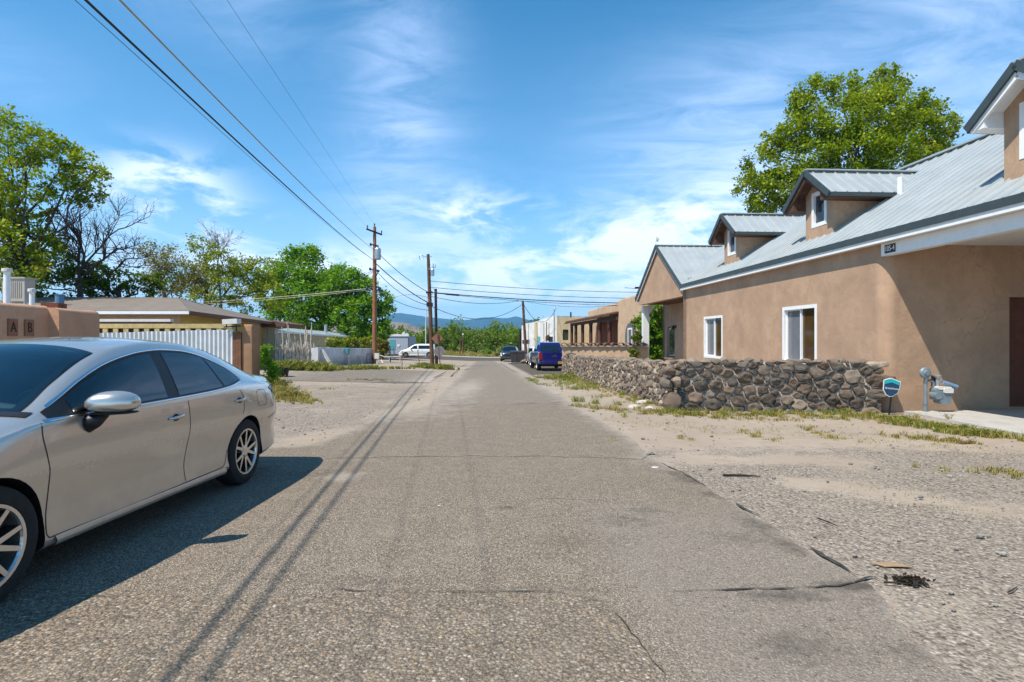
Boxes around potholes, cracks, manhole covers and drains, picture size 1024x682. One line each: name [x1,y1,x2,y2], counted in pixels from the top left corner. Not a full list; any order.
crack [613,610,665,678]
crack [325,452,879,591]
